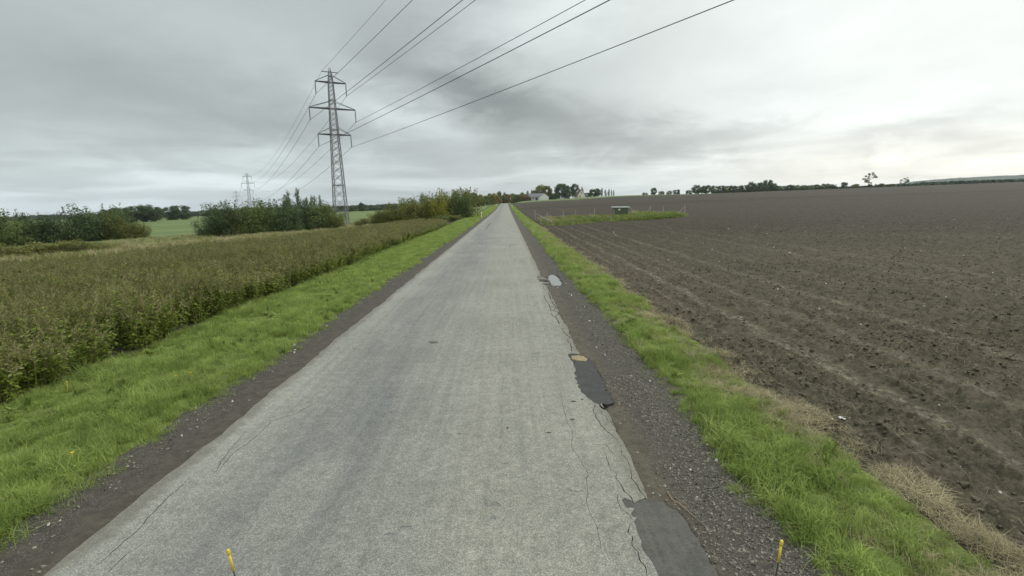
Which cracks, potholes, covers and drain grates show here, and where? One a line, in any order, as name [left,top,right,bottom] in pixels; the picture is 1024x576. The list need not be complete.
crack [594,403,647,575]
crack [99,489,178,572]
